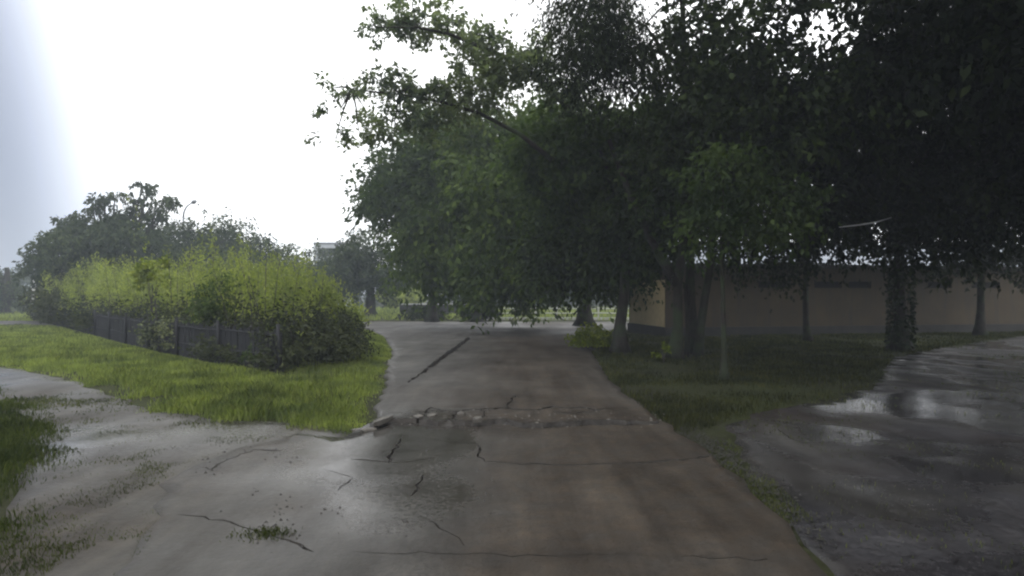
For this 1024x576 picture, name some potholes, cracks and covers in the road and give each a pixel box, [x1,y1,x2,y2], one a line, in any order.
crack [185,515,313,552]
crack [328,395,710,490]
